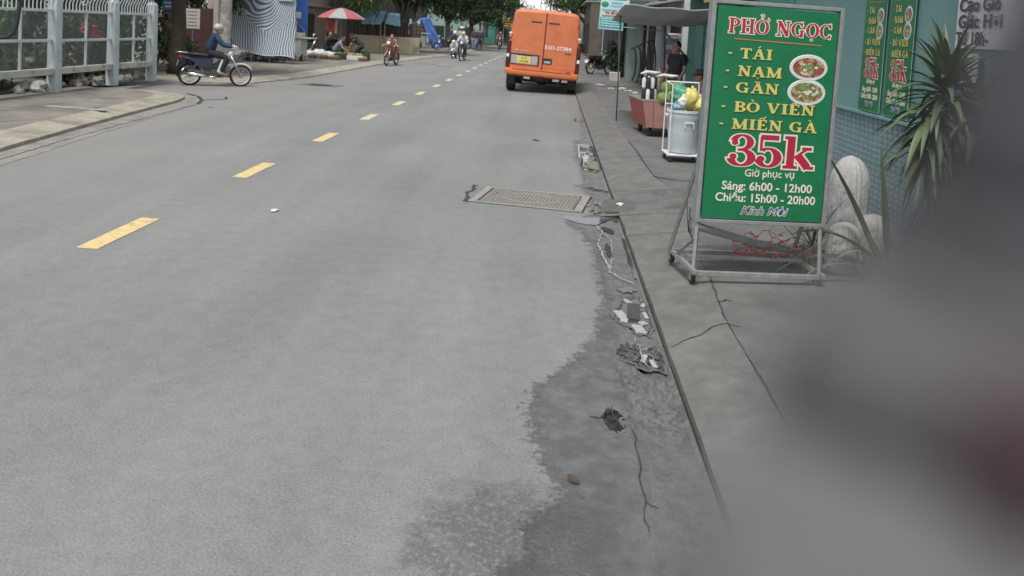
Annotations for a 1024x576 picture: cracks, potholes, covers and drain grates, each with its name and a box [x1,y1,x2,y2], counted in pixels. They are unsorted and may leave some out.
pothole [611,295,656,338]
crack [634,279,768,389]
pothole [612,340,669,375]
crack [630,426,658,535]
pothole [596,402,628,437]
crack [596,225,639,286]
pothole [576,144,600,173]
